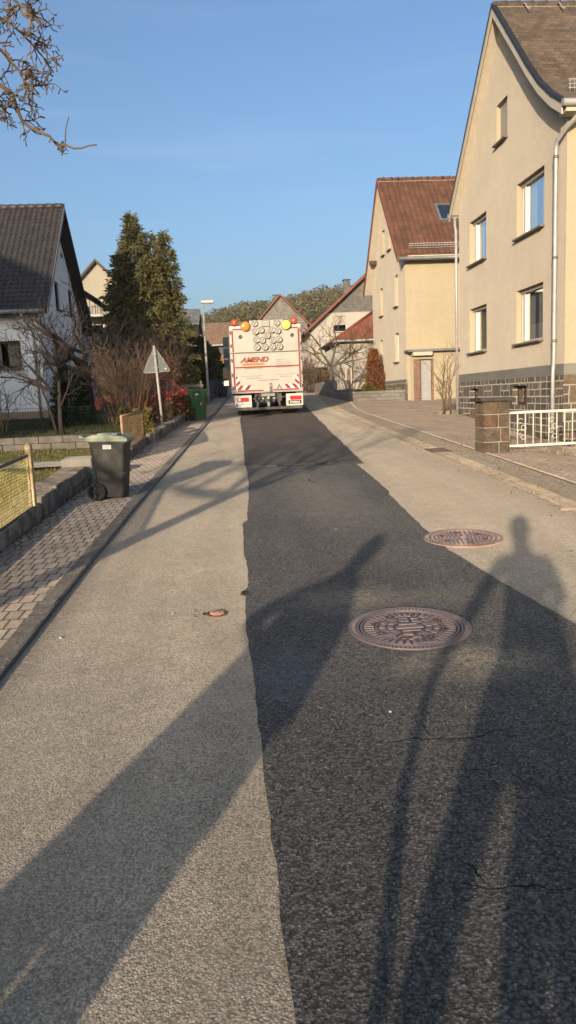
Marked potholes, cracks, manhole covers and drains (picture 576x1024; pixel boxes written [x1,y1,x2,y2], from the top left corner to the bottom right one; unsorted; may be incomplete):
crack [449,855,576,890]
utility cover [202,610,228,618]
crack [369,715,512,743]
manhole cover [424,529,503,548]
manhole cover [348,607,472,651]
